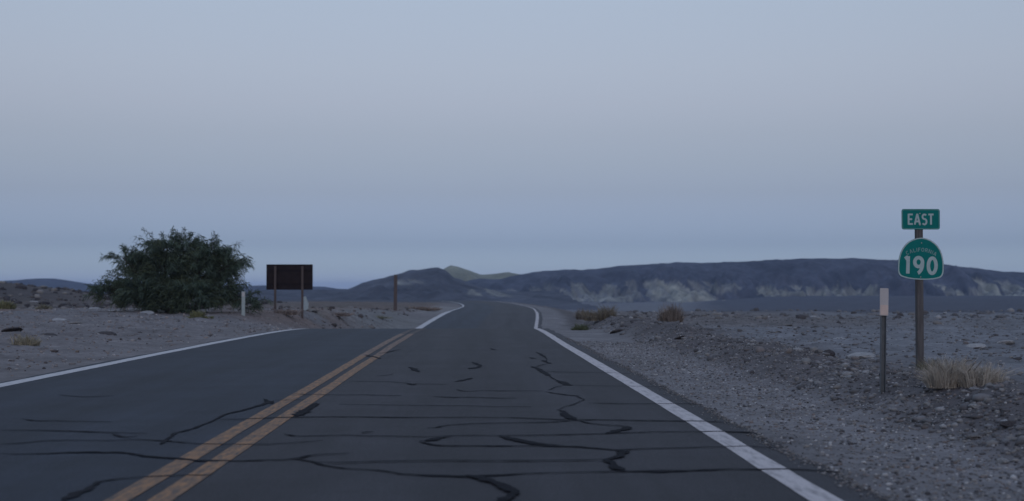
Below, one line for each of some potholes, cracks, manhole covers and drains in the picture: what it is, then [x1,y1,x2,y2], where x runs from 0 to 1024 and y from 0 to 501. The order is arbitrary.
crack [7,348,754,444]
crack [61,474,212,500]
